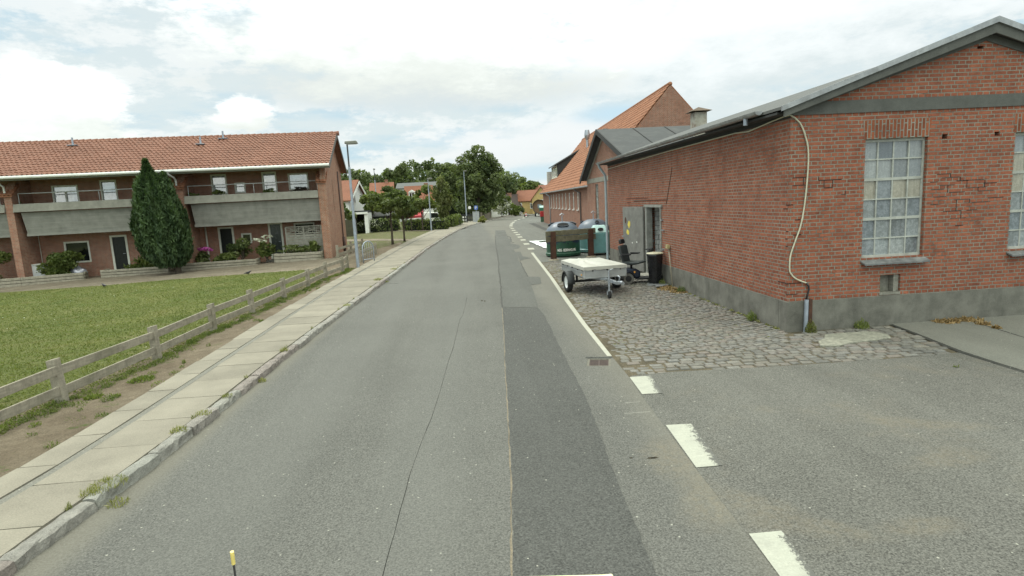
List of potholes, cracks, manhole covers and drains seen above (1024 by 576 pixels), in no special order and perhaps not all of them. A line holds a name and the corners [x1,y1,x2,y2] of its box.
crack [382,299,467,576]
